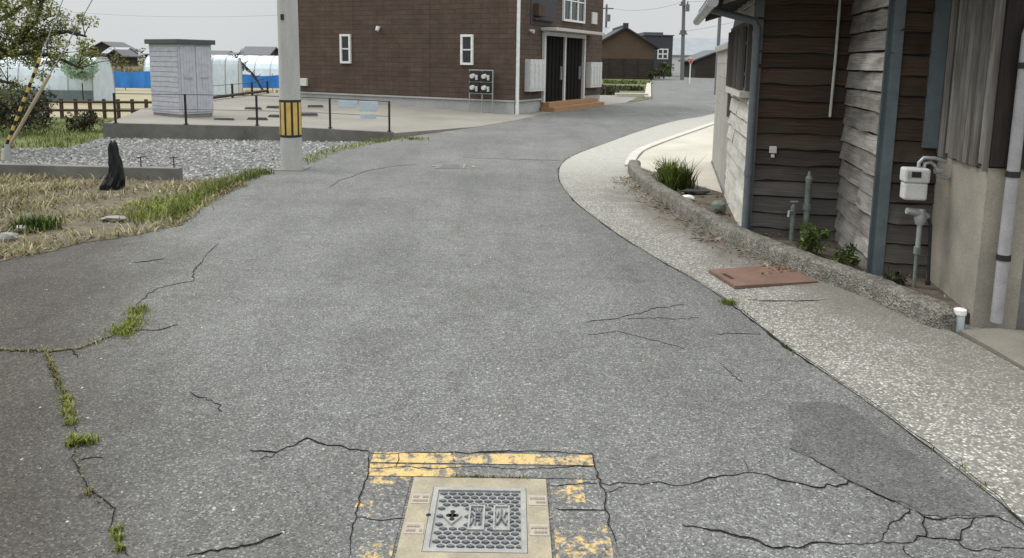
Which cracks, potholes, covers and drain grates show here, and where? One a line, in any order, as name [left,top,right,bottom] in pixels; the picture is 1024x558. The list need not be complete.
crack [594,448,1024,558]
crack [186,530,285,556]
crack [250,437,370,460]
crack [5,244,218,556]
manhole cover [395,477,552,558]
crack [588,304,699,349]
